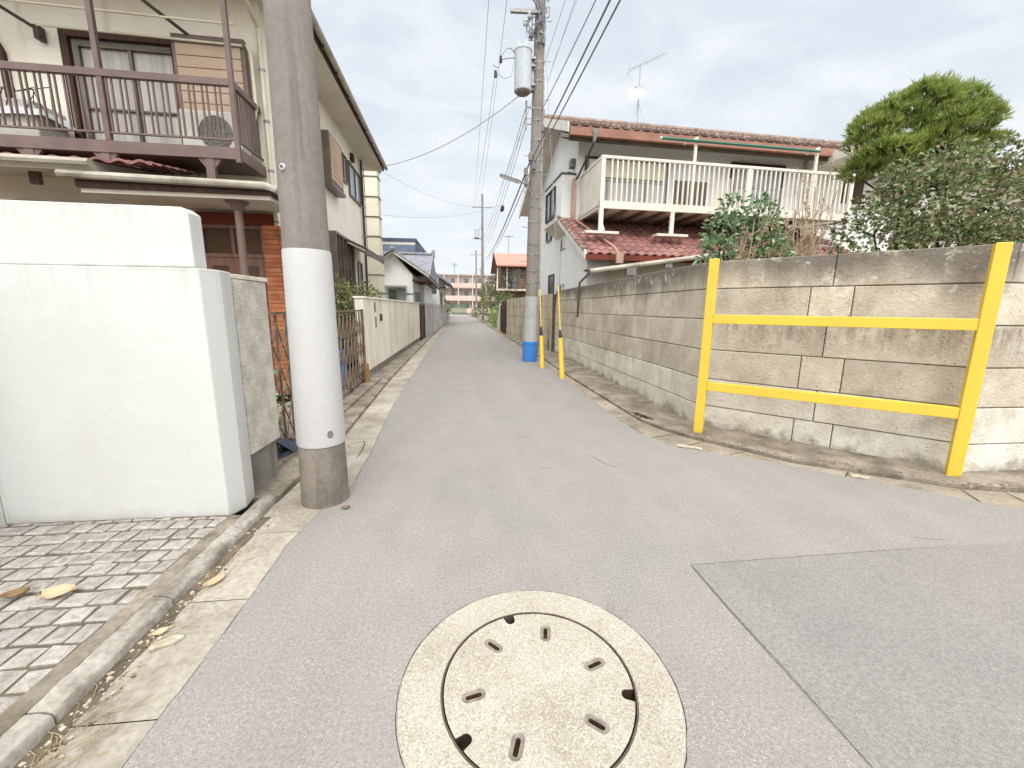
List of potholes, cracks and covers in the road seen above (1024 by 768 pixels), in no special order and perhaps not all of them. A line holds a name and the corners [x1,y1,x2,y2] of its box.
manhole cover [395,591,687,768]
